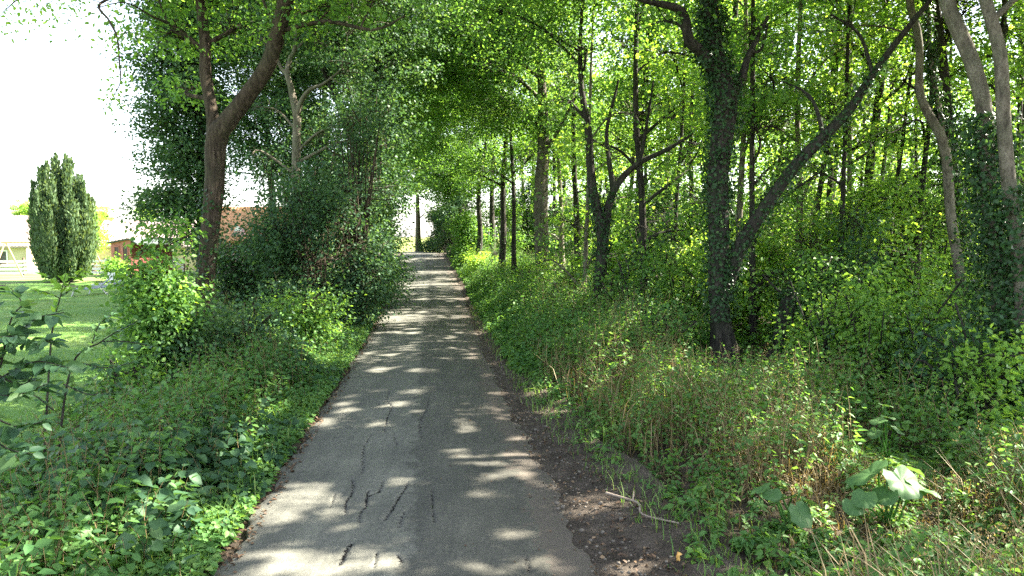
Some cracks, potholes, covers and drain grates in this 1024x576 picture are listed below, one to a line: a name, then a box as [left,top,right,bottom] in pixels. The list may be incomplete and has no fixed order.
crack [330,401,407,525]
crack [338,544,352,566]
